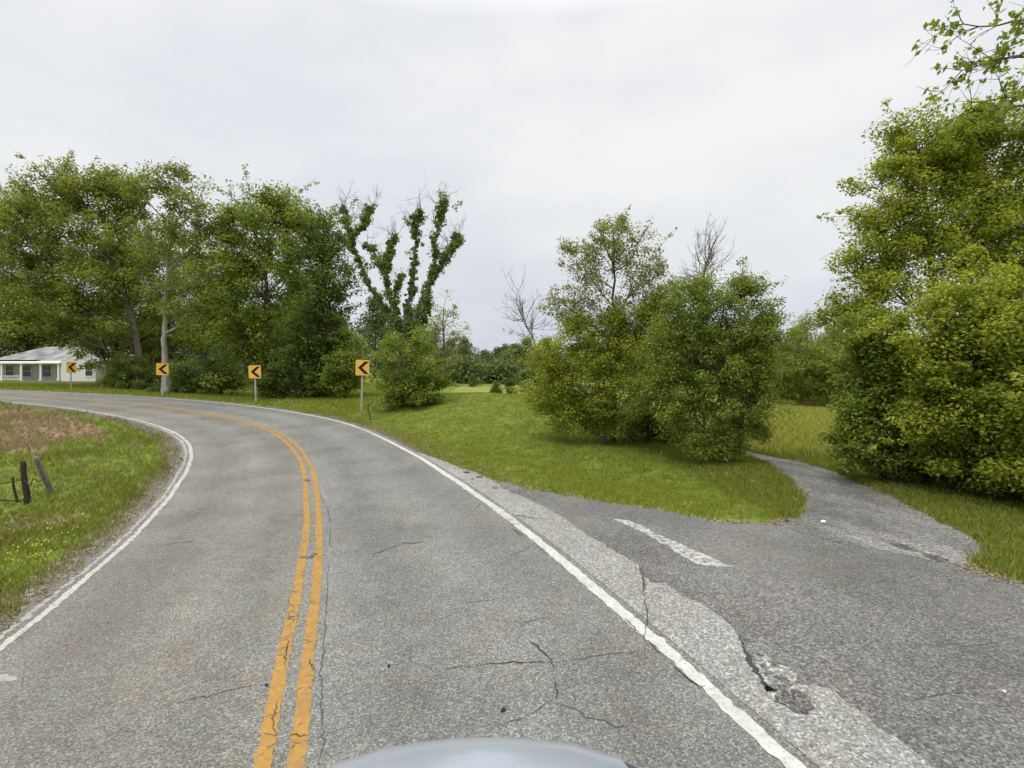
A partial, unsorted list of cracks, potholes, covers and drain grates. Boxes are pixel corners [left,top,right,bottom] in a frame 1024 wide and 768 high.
crack [435,575,706,728]
pothole [774,684,815,714]
